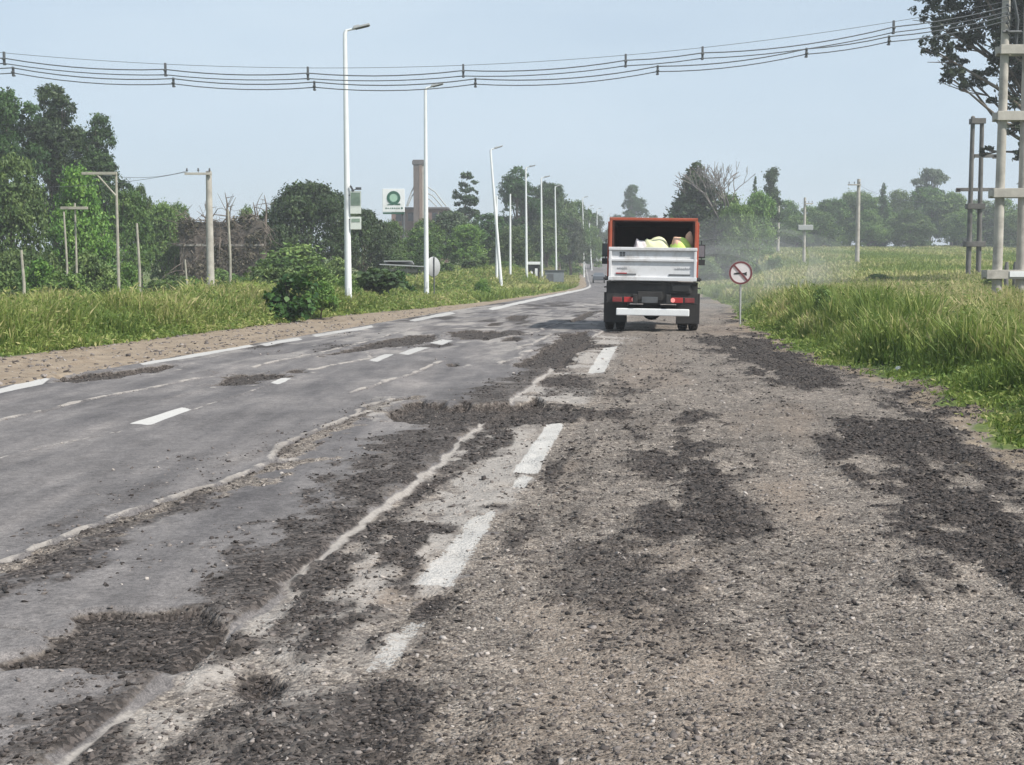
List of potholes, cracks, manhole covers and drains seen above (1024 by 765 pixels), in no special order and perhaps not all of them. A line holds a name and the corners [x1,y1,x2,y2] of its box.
pothole [510,330,599,371]
pothole [0,604,237,676]
crack [0,360,449,563]
pothole [445,330,510,341]
pothole [50,363,182,383]
pothole [201,372,296,386]
pothole [383,396,584,426]
